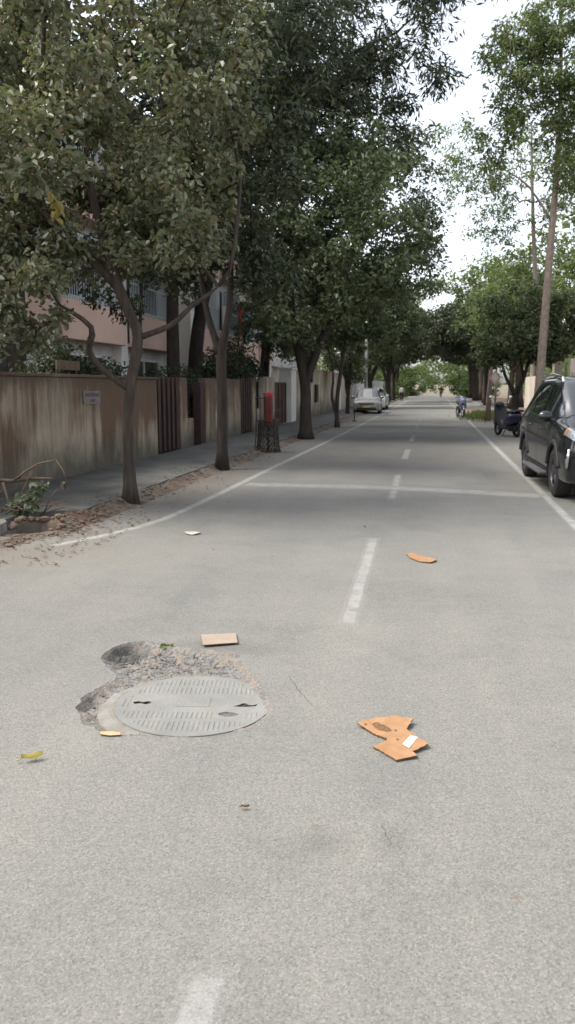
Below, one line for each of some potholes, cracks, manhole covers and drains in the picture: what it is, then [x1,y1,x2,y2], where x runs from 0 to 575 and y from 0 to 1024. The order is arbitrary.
manhole cover [97,676,268,739]
